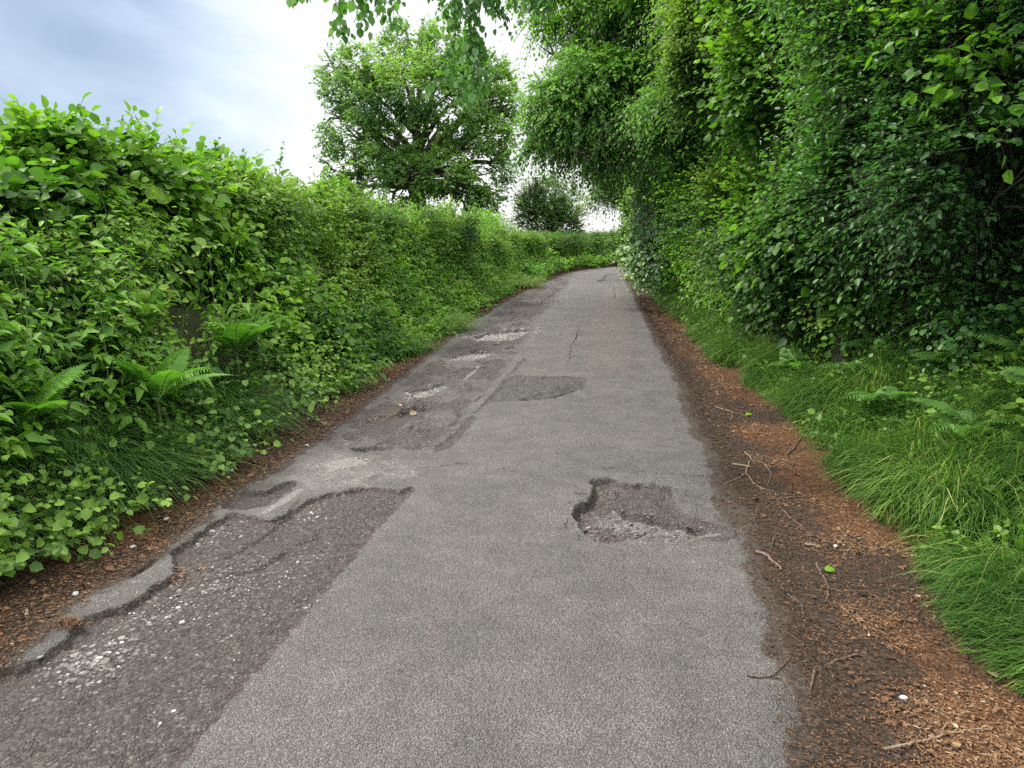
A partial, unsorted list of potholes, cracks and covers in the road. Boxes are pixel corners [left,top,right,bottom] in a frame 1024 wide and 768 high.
pothole [571,476,758,544]
crack [566,321,665,378]
